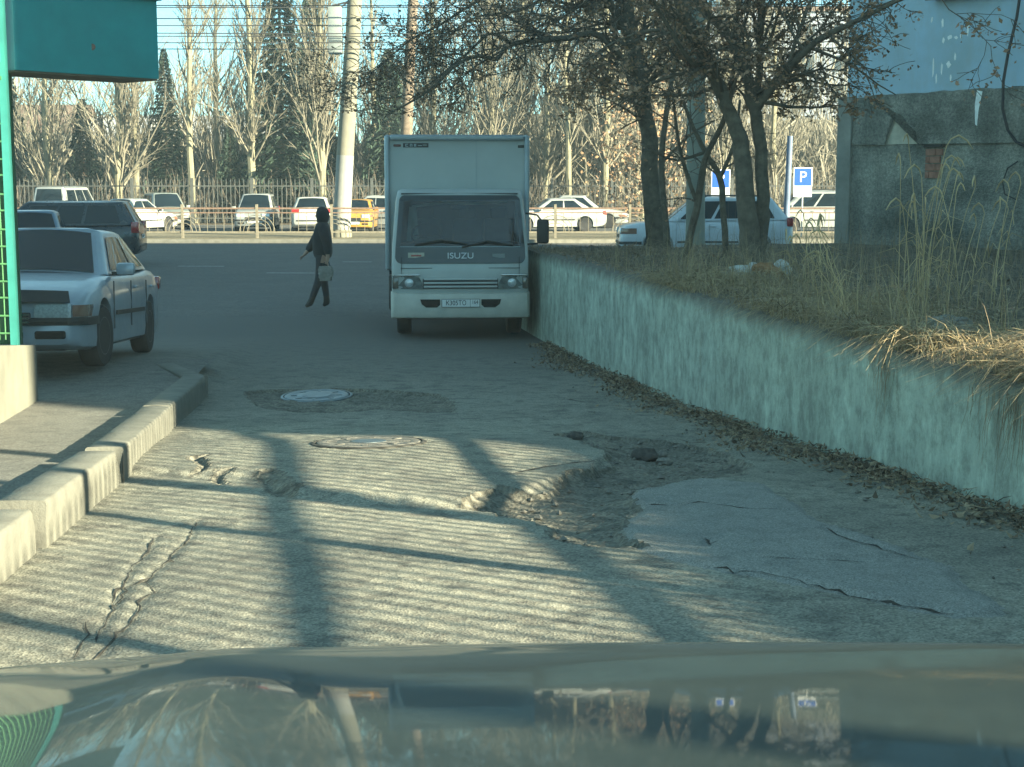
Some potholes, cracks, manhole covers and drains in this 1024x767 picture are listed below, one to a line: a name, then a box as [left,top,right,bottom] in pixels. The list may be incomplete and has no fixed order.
crack [73,522,197,660]
pothole [457,430,756,549]
crack [641,501,779,509]
pothole [249,468,307,499]
manhole cover [280,389,353,402]
manhole cover [310,436,427,449]
crack [713,527,949,614]
